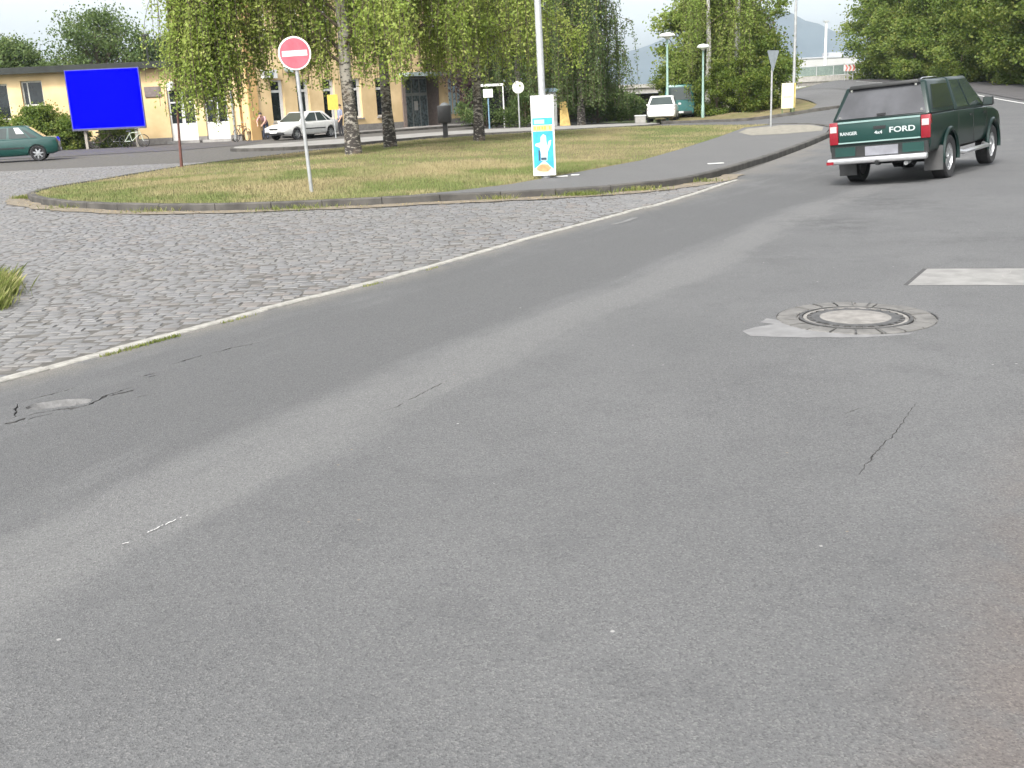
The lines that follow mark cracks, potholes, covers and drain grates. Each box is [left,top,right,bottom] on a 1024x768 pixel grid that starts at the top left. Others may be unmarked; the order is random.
manhole cover [743,301,939,338]
crack [859,405,915,474]
crack [5,344,251,424]
